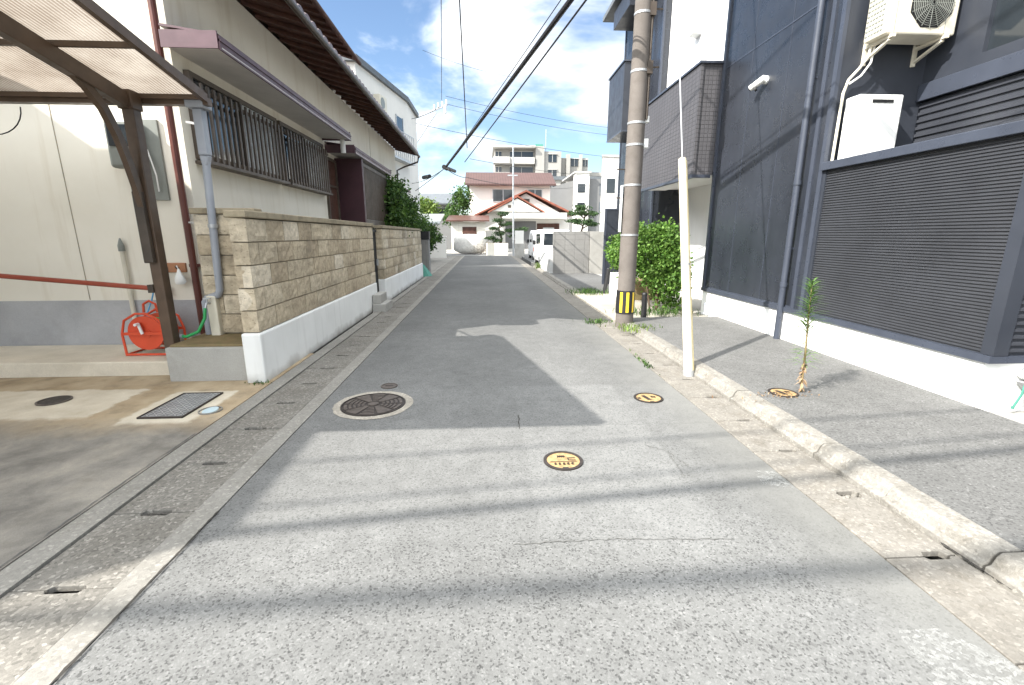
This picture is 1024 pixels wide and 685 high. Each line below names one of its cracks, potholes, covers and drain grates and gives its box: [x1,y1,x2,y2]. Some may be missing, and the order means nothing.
utility cover [768,388,799,398]
utility cover [34,395,73,406]
utility cover [634,393,663,403]
manhole cover [332,391,413,420]
utility cover [543,451,583,471]
